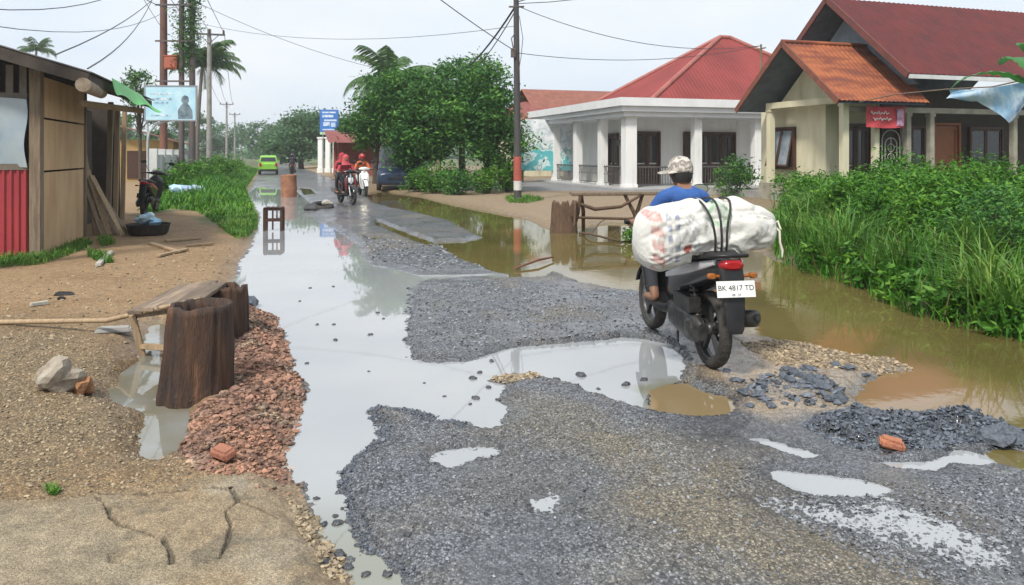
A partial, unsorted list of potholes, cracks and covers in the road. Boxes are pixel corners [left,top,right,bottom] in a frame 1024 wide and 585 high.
pothole [847,366,959,411]
pothole [760,463,906,500]
pothole [474,331,693,408]
pothole [735,489,1024,570]
pothole [228,186,516,585]
crack [29,486,280,561]
pothole [866,441,997,471]
pothole [522,484,579,514]
pothole [735,430,839,459]
